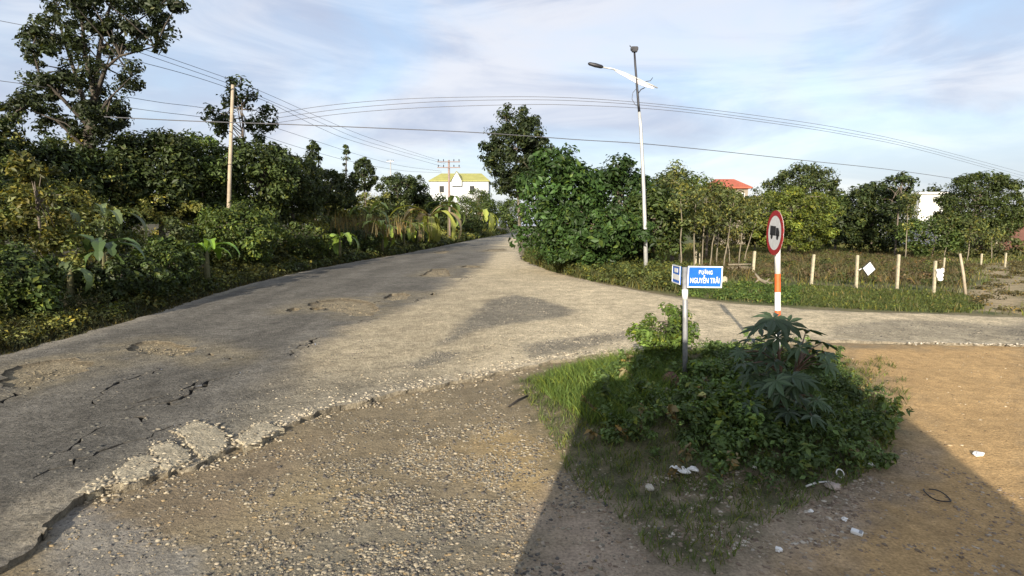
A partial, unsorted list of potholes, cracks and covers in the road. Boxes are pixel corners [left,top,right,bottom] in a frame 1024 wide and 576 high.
pothole [126,340,197,357]
pothole [384,293,411,301]
crack [0,386,32,404]
crack [289,336,324,356]
pothole [419,269,451,277]
crack [33,369,239,478]
pothole [307,298,380,317]
pothole [0,357,94,388]
